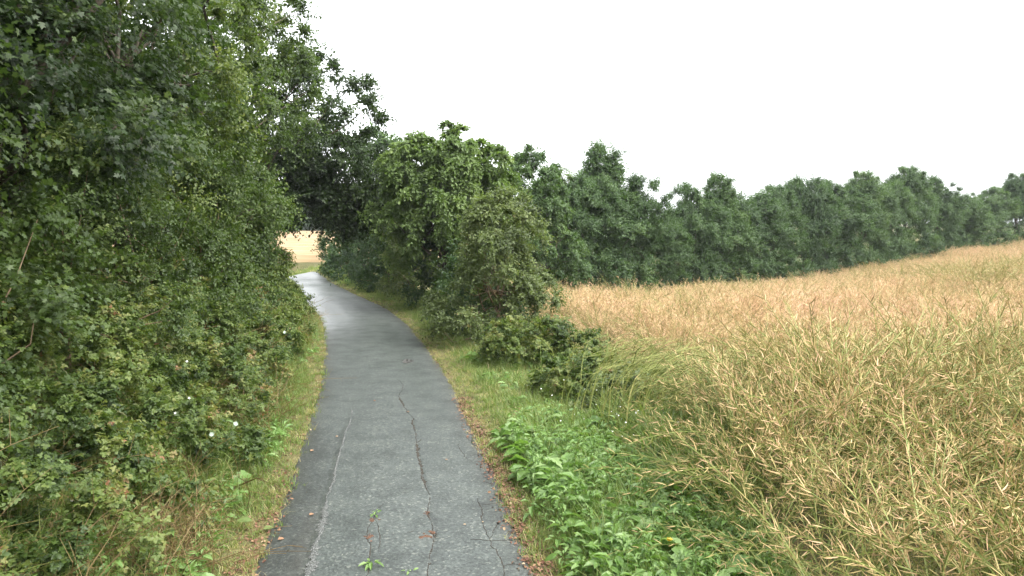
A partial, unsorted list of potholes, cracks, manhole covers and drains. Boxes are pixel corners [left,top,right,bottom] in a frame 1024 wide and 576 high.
crack [470,471,515,576]
crack [398,387,437,576]
crack [366,507,381,576]
